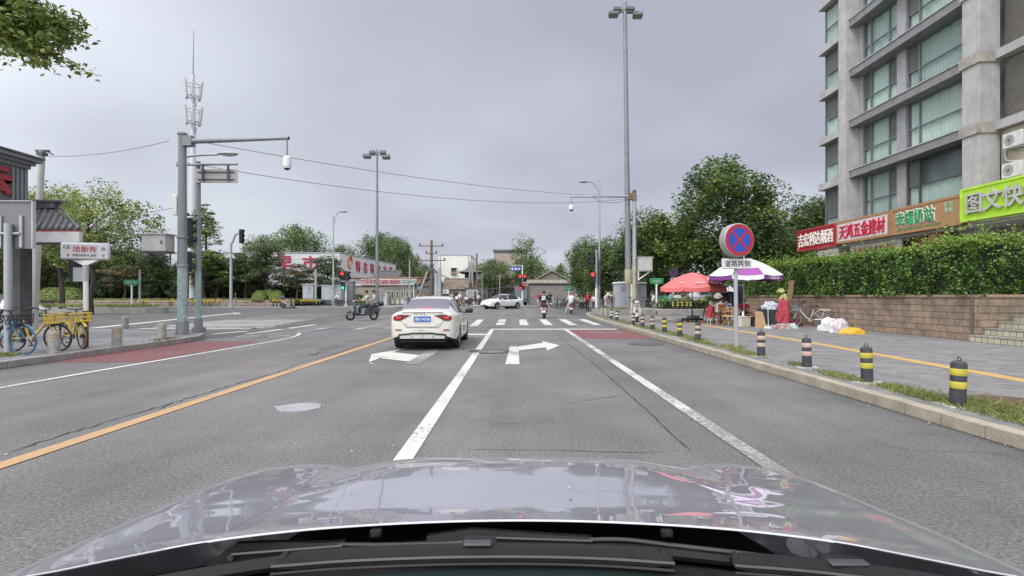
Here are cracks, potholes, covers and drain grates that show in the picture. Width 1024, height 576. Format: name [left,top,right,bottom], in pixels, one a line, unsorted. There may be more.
manhole cover [274,403,321,412]
